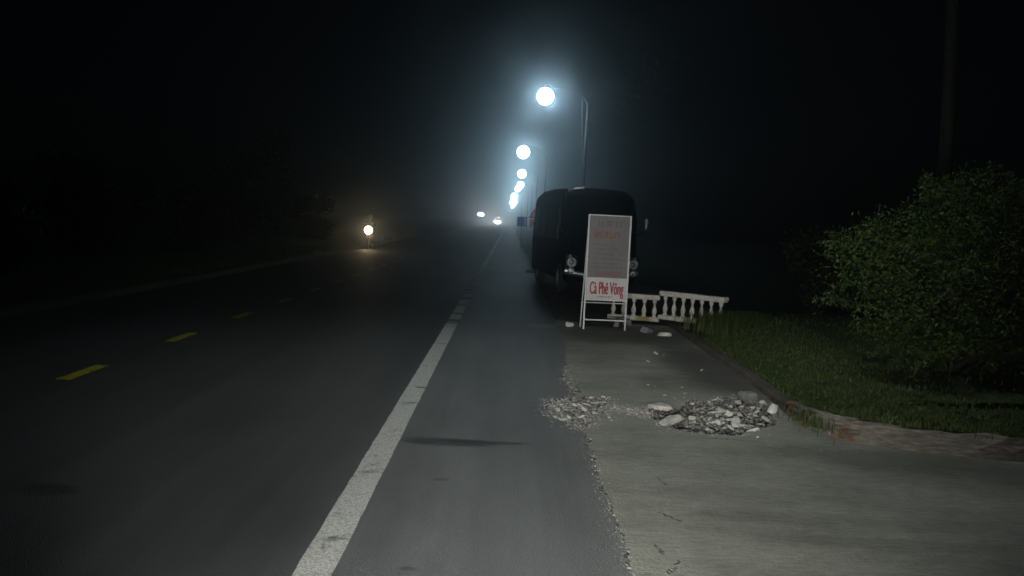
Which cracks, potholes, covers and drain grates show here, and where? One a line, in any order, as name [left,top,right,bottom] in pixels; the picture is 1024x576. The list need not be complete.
pothole [545,396,610,429]
pothole [648,397,777,436]
